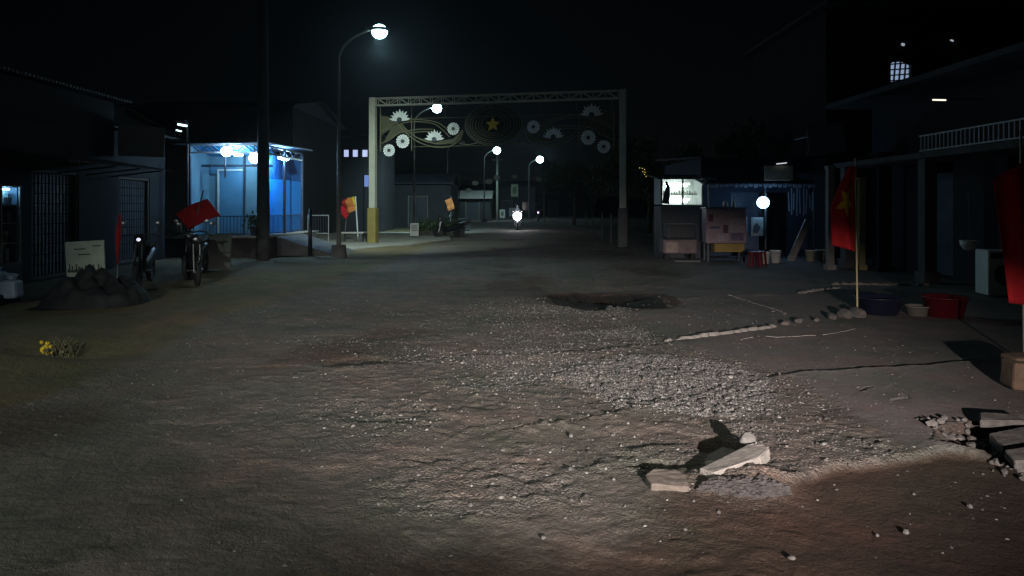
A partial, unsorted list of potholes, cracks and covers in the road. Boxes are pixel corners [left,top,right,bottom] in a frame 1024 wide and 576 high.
pothole [693,435,745,454]
crack [515,403,663,429]
pothole [930,420,1015,469]
crack [783,358,987,374]
crack [271,361,429,376]
pothole [541,293,671,311]
